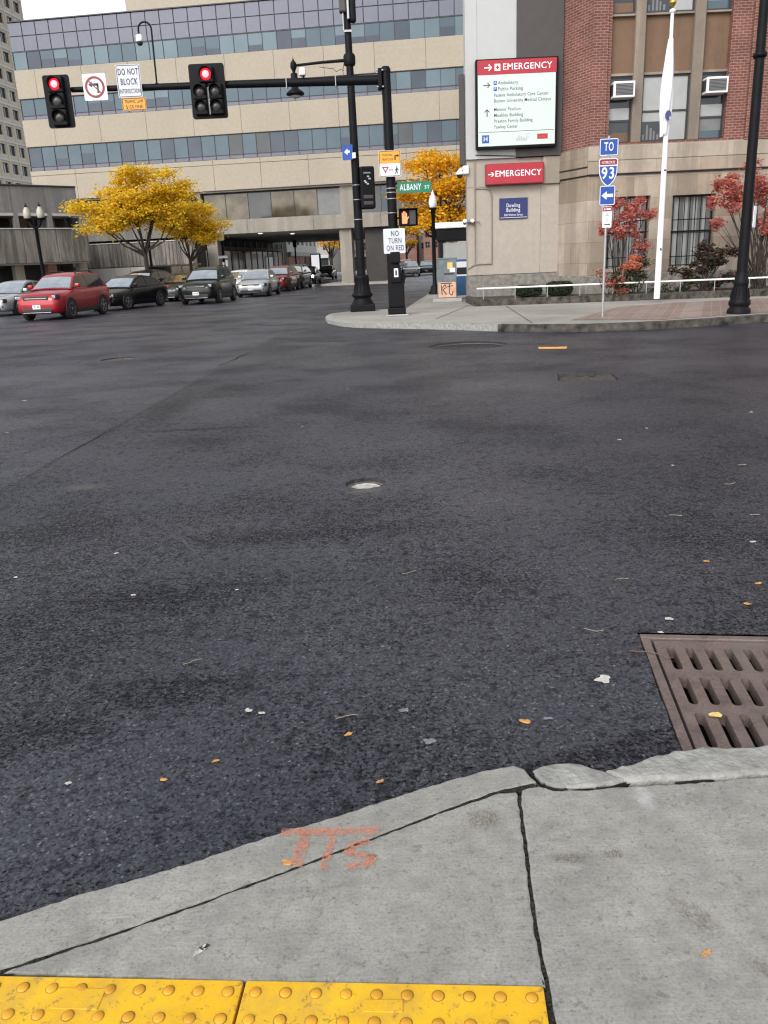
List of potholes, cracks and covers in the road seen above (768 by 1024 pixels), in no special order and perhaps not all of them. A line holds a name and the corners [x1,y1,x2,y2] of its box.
manhole cover [428,341,508,350]
drain grate [639,634,768,751]
utility cover [345,478,386,489]
